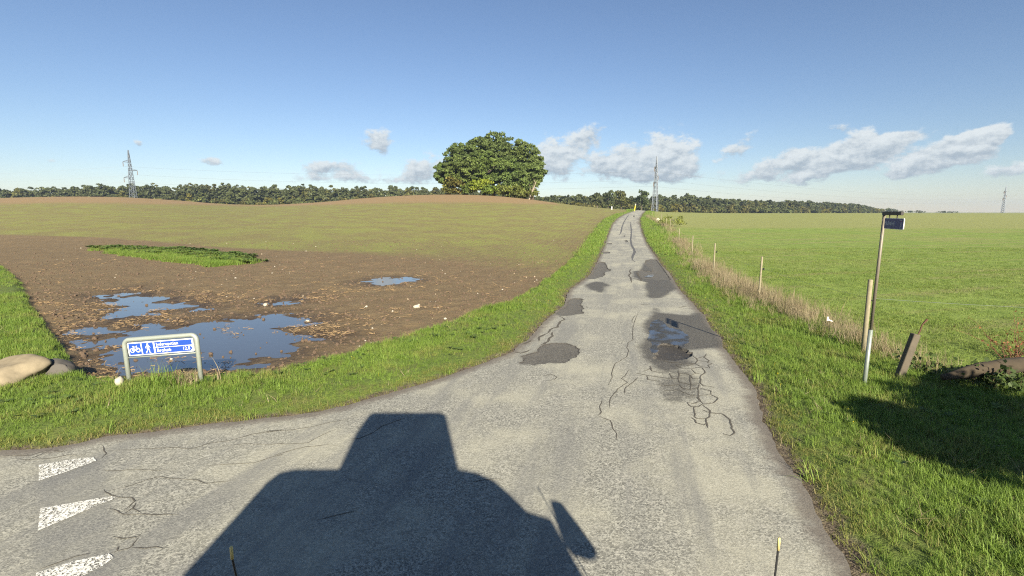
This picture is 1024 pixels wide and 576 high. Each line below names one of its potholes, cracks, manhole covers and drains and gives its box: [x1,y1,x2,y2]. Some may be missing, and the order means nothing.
pothole [652,343,693,361]
crack [102,416,360,515]
crack [517,317,565,353]
crack [619,216,642,282]
crack [599,304,735,440]
crack [111,533,161,553]
